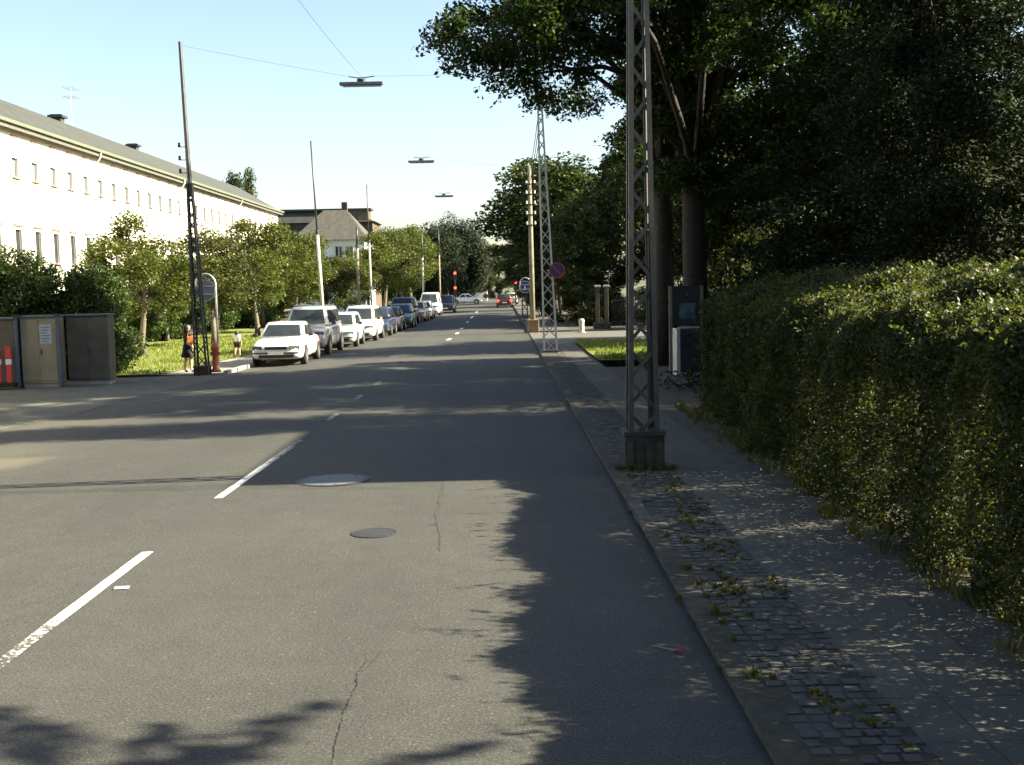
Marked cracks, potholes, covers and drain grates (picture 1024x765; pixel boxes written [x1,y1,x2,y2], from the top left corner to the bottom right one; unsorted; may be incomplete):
manhole cover [296,474,370,487]
crack [331,650,383,764]
crack [434,484,445,551]
manhole cover [351,528,397,538]
